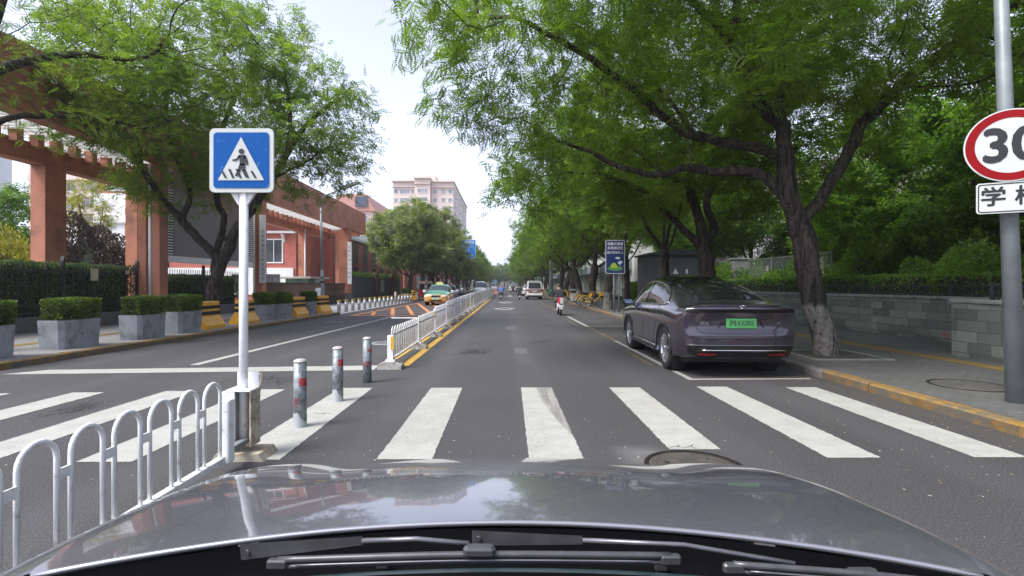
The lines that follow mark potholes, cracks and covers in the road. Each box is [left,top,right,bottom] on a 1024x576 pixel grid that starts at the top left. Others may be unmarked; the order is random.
manhole cover [644,450,742,465]
manhole cover [926,379,1004,392]
